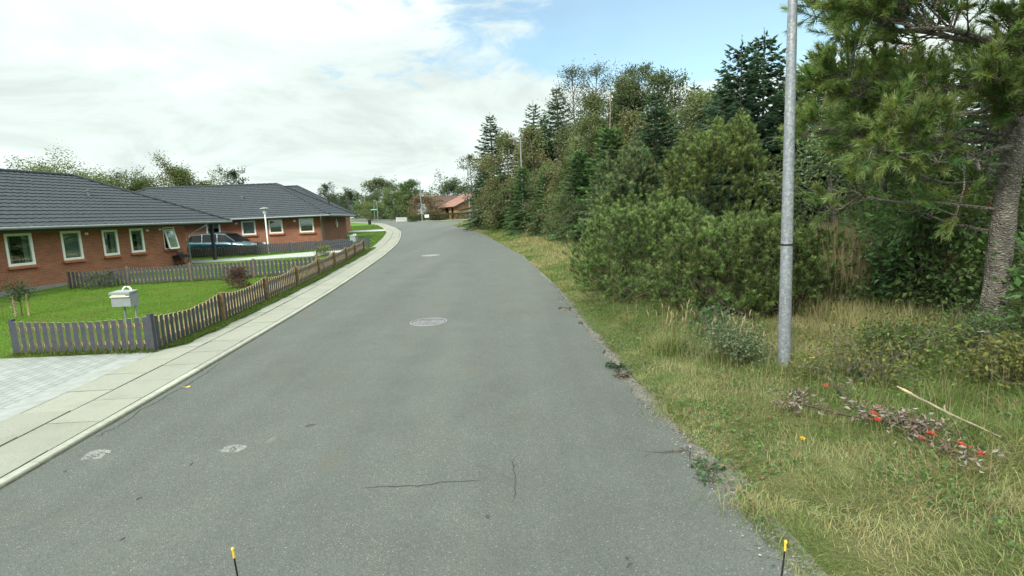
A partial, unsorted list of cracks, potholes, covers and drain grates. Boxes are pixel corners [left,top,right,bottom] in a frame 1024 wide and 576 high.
crack [364,480,482,488]
manhole cover [410,318,447,326]
crack [99,364,218,436]
